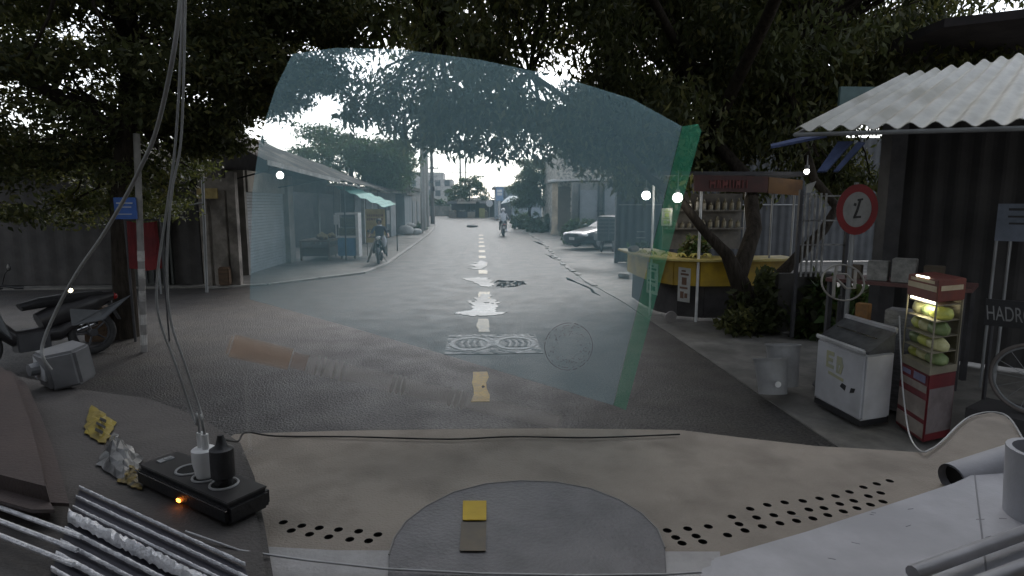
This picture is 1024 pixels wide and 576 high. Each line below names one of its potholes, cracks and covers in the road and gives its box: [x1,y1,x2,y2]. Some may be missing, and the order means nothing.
pothole [495,280,526,288]
